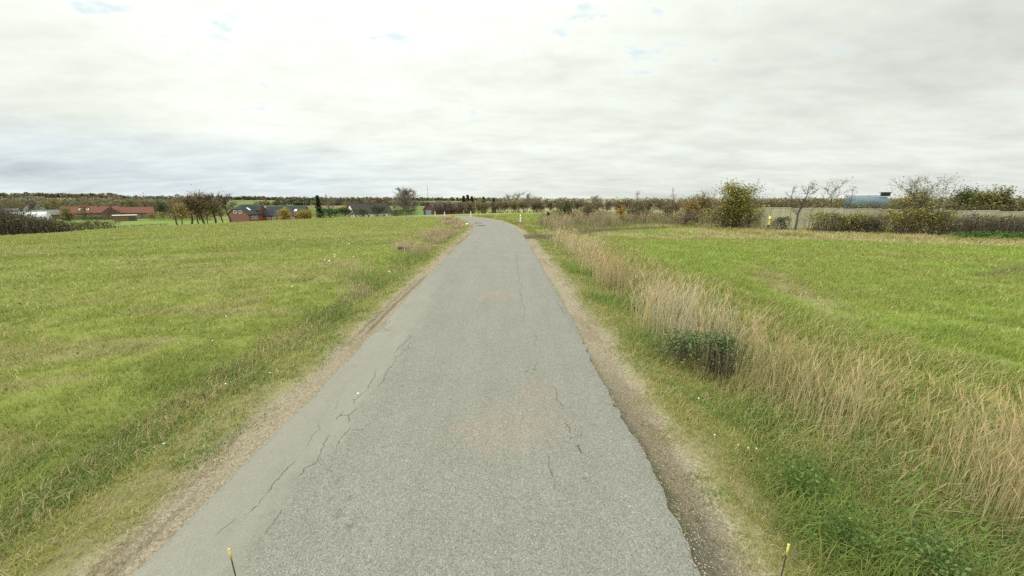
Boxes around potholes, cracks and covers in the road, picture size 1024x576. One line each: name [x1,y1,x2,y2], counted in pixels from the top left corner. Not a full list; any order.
crack [219,320,411,533]
